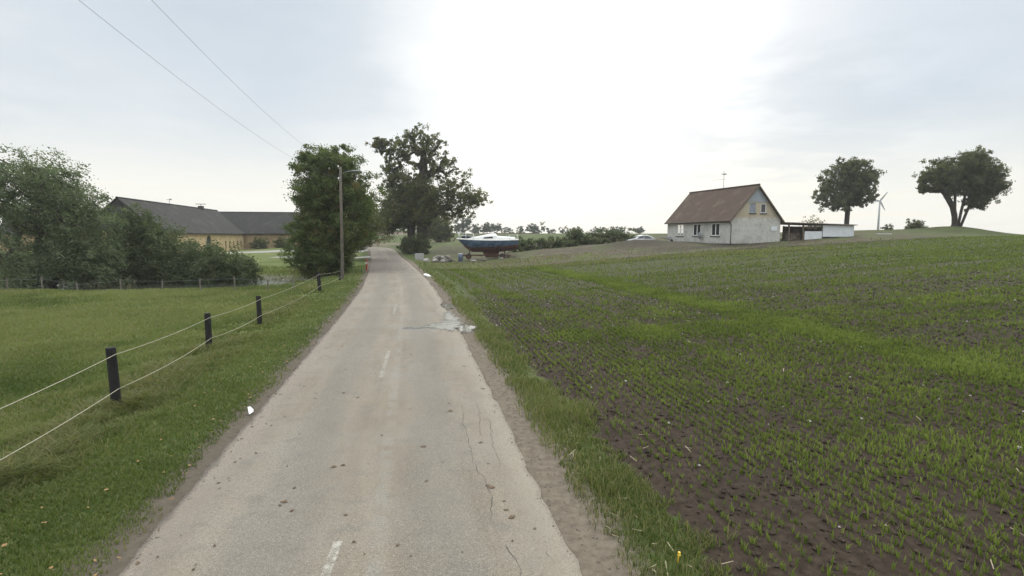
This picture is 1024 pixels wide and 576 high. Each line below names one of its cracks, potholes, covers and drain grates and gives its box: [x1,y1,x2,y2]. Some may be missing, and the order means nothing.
pothole [454,323,479,334]
crack [462,406,500,519]
